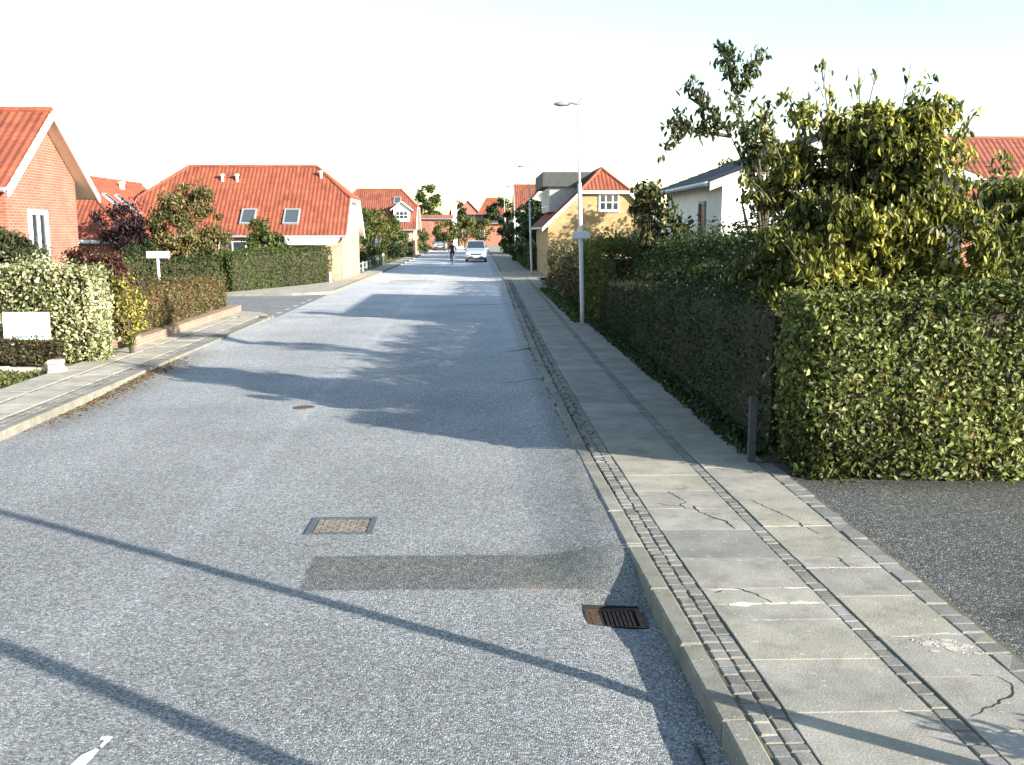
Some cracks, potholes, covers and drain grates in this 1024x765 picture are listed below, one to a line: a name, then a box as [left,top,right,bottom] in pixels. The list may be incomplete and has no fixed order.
drain grate [582,604,650,629]
crack [658,492,735,529]
crack [971,674,1014,717]
manhole cover [304,517,378,535]
